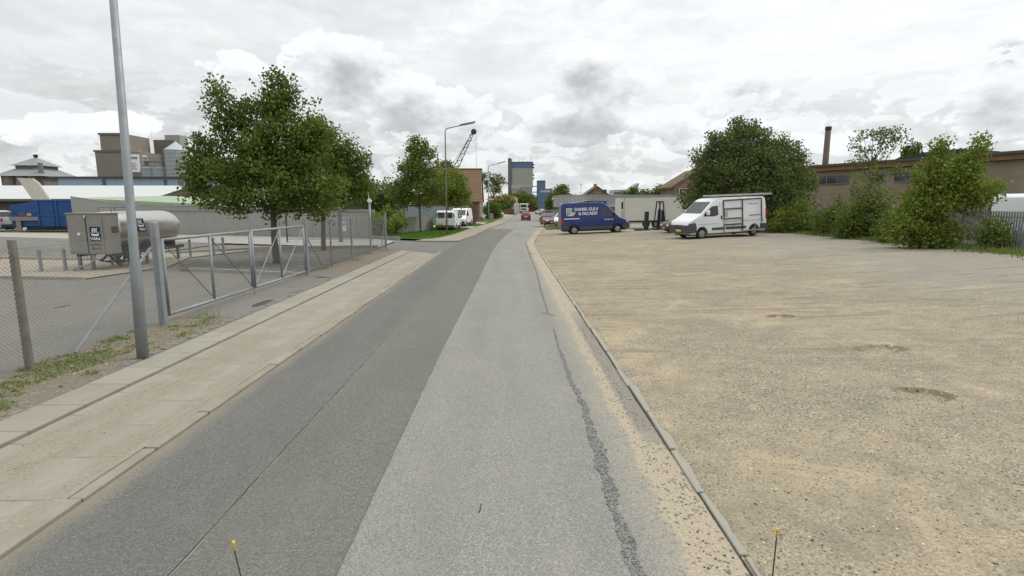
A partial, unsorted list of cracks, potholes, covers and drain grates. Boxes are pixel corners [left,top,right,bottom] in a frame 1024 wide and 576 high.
pothole [871,384,982,408]
pothole [836,343,927,357]
crack [505,241,647,576]
